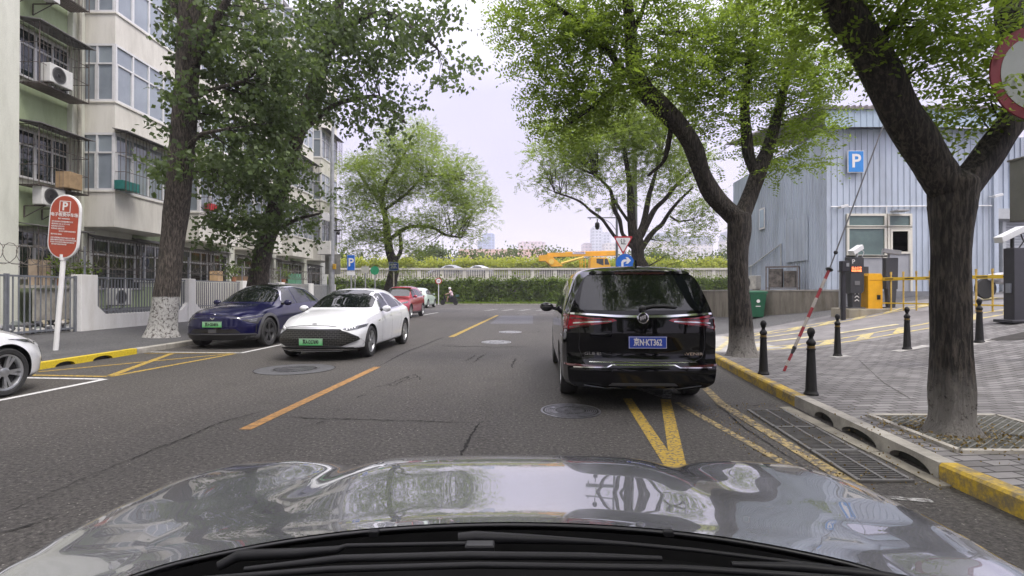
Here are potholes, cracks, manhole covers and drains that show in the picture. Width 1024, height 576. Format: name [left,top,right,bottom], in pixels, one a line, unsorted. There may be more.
crack [1,409,480,533]
manhole cover [252,364,336,375]
drain grate [811,450,915,483]
crack [444,331,539,368]
drain grate [774,426,858,452]
manhole cover [541,403,601,419]
drain grate [747,409,816,428]
